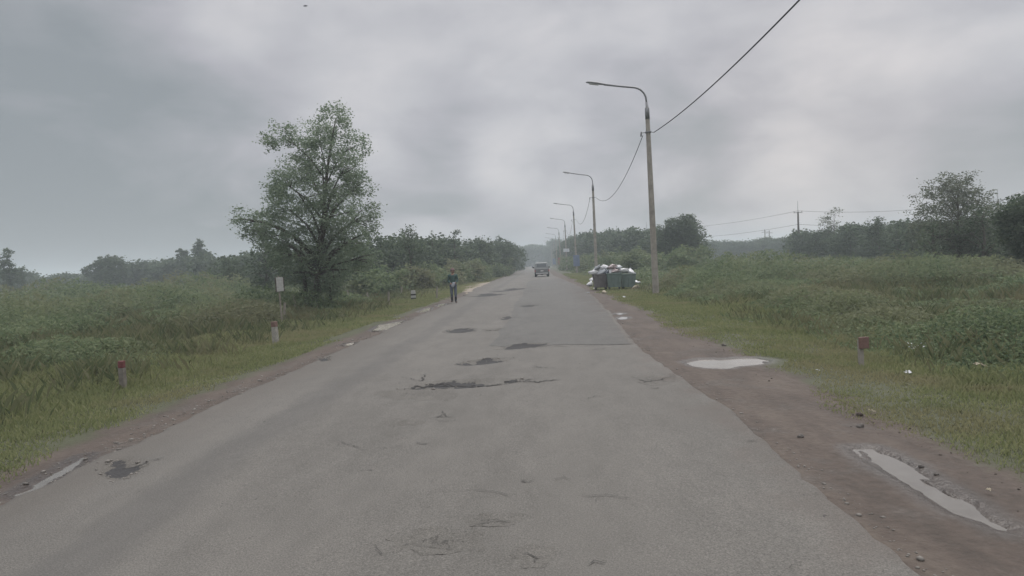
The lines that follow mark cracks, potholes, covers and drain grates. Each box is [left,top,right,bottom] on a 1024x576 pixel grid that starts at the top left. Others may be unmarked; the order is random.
pothole [101,458,148,481]
pothole [395,378,521,390]
pothole [455,357,505,366]
